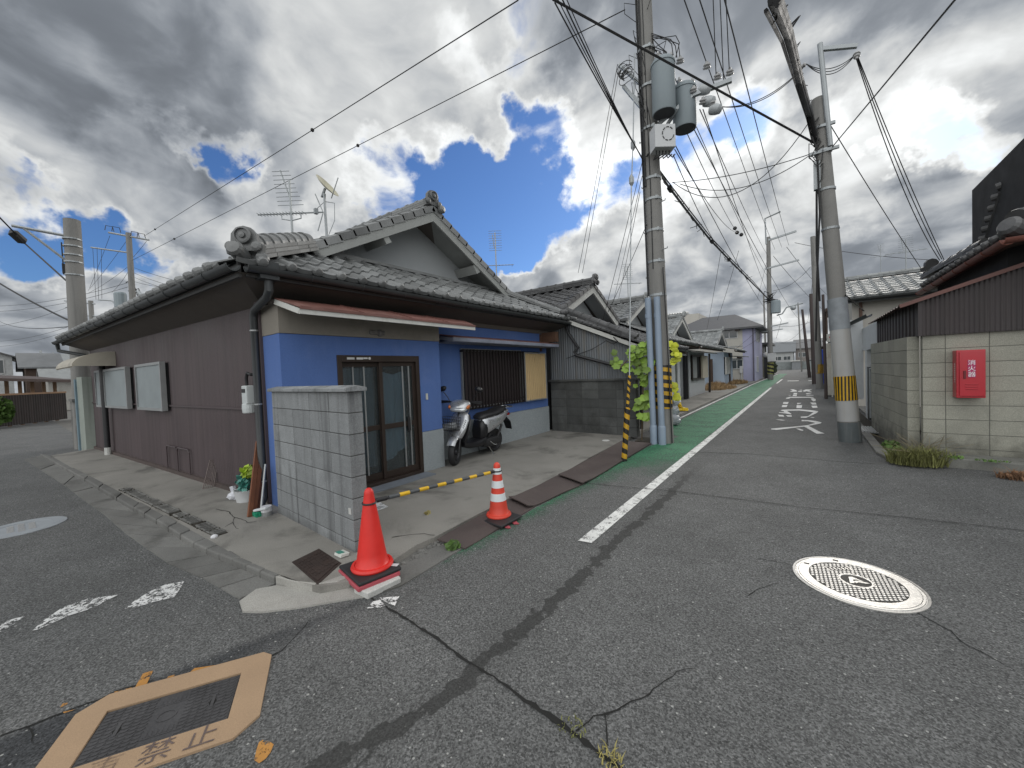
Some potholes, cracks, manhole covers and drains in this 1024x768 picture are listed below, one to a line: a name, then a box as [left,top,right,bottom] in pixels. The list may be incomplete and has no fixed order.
manhole cover [0,516,68,539]
manhole cover [36,652,272,768]
crack [919,613,1016,671]
crack [371,598,692,768]
manhole cover [793,556,932,614]
